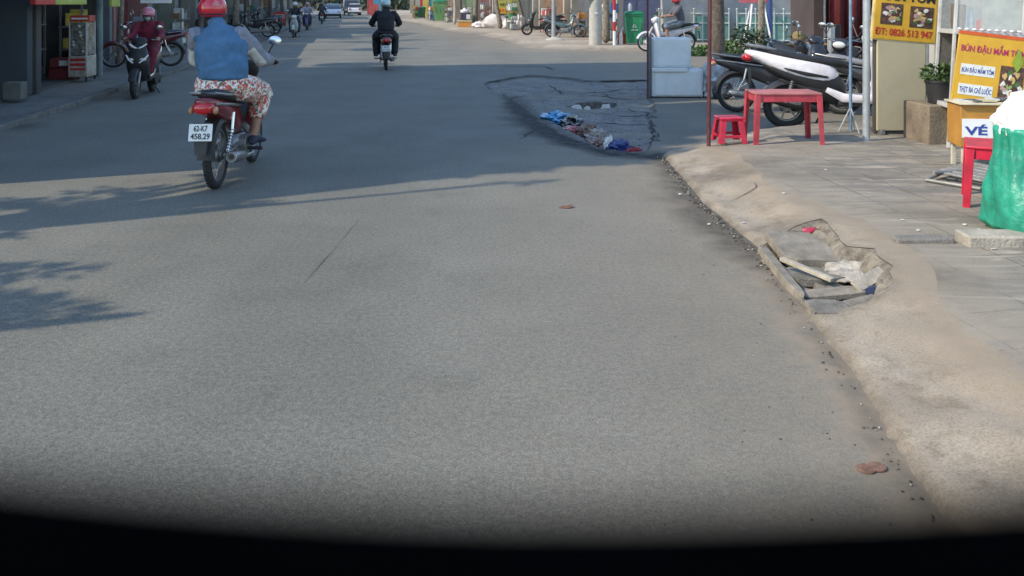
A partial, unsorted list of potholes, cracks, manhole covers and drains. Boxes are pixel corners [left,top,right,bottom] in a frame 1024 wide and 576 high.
pothole [764,219,893,314]
pothole [484,76,661,153]
crack [488,66,656,145]
